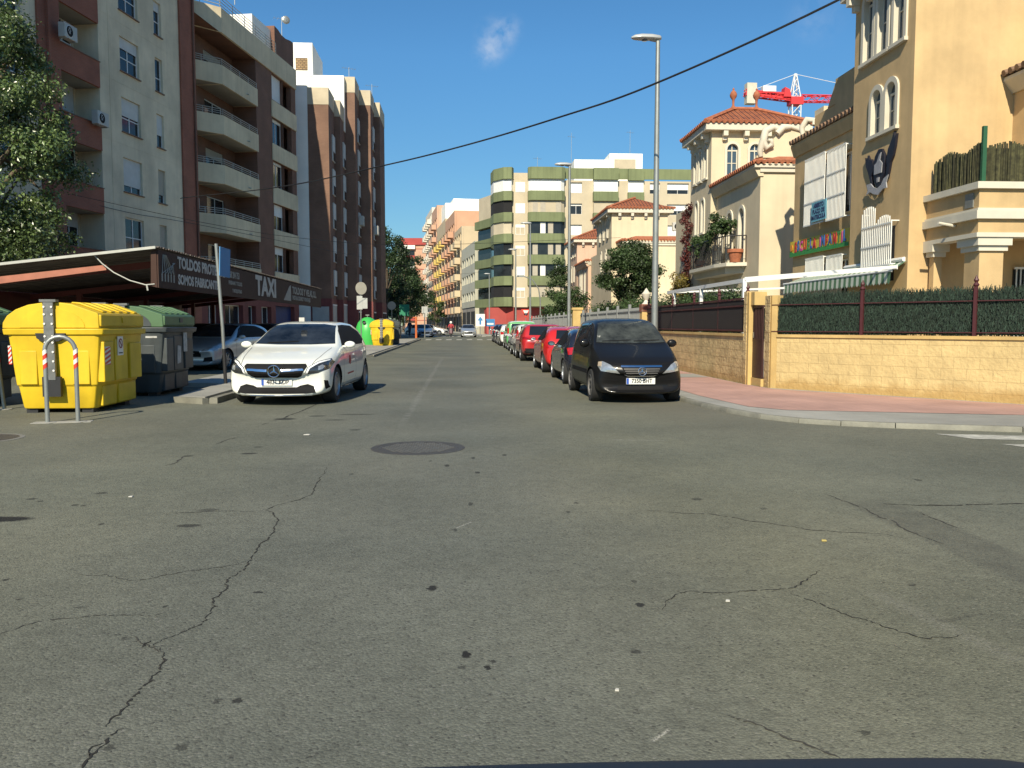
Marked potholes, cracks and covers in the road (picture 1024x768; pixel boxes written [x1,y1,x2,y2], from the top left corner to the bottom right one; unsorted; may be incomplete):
crack [650,510,903,538]
manhole cover [0,433,25,442]
crack [662,570,962,639]
crack [729,715,840,758]
manhole cover [371,441,465,455]
crack [0,473,325,768]
